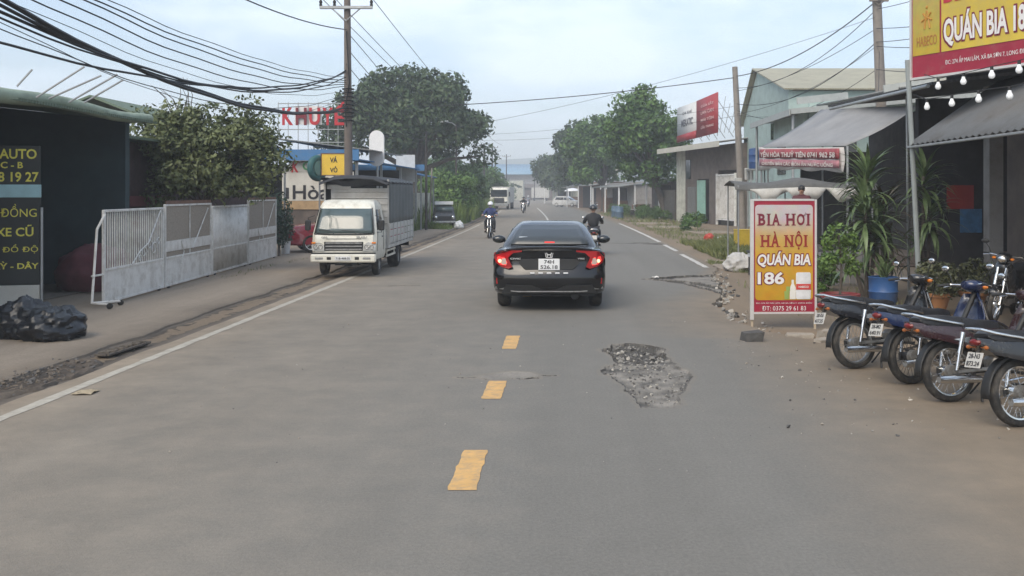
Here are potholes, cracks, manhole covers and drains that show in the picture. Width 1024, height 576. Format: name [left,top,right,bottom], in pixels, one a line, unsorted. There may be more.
pothole [645,275,723,294]
pothole [600,343,693,408]
